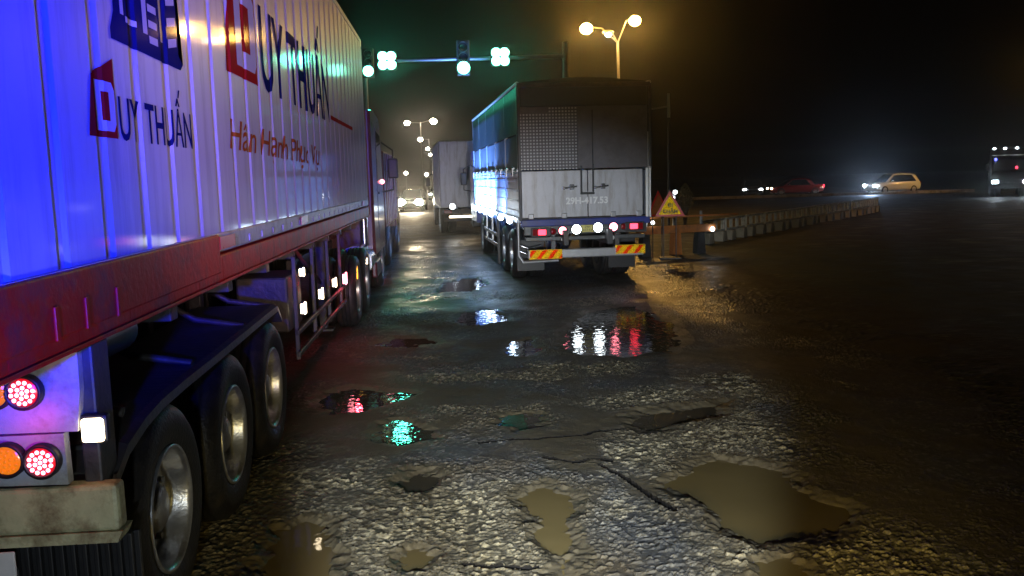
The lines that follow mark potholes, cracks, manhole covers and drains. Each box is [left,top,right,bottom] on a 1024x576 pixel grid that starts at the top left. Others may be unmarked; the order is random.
pothole [488,409,552,433]
pothole [431,276,498,293]
pothole [365,335,446,348]
pothole [387,541,446,575]
pothole [652,453,873,554]
crack [478,428,678,512]
pothole [360,416,446,447]
pothole [300,383,425,416]
pothole [612,397,734,435]
pothole [446,308,516,327]
pothole [548,303,695,359]
pothole [384,464,453,495]
